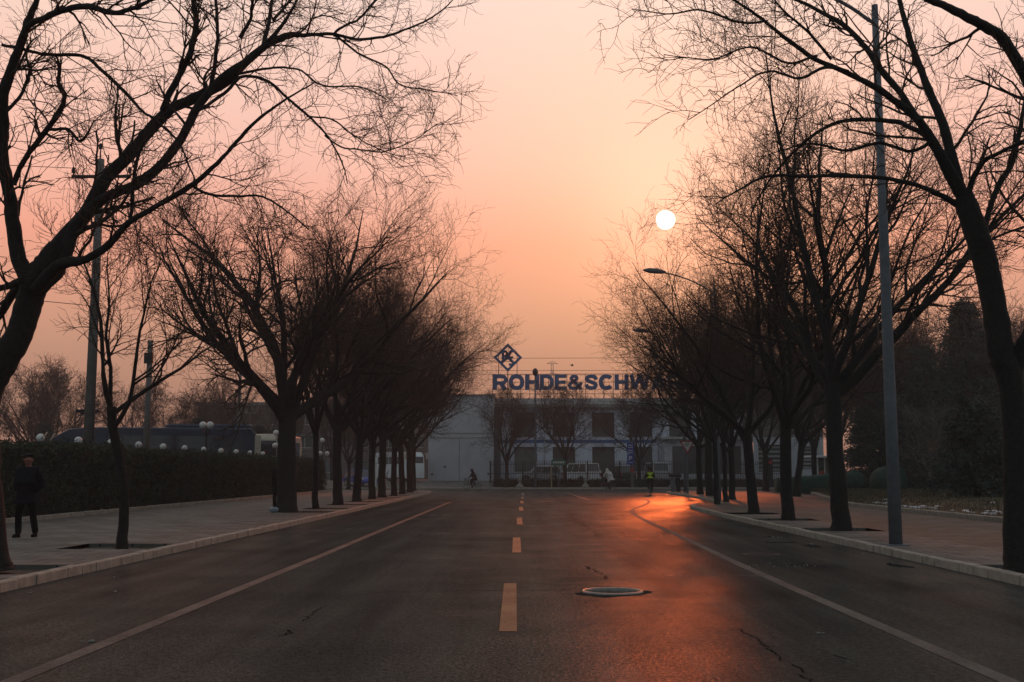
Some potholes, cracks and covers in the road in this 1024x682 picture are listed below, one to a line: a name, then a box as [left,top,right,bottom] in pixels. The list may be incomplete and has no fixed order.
manhole cover [575,586,652,597]
crack [724,628,813,682]
